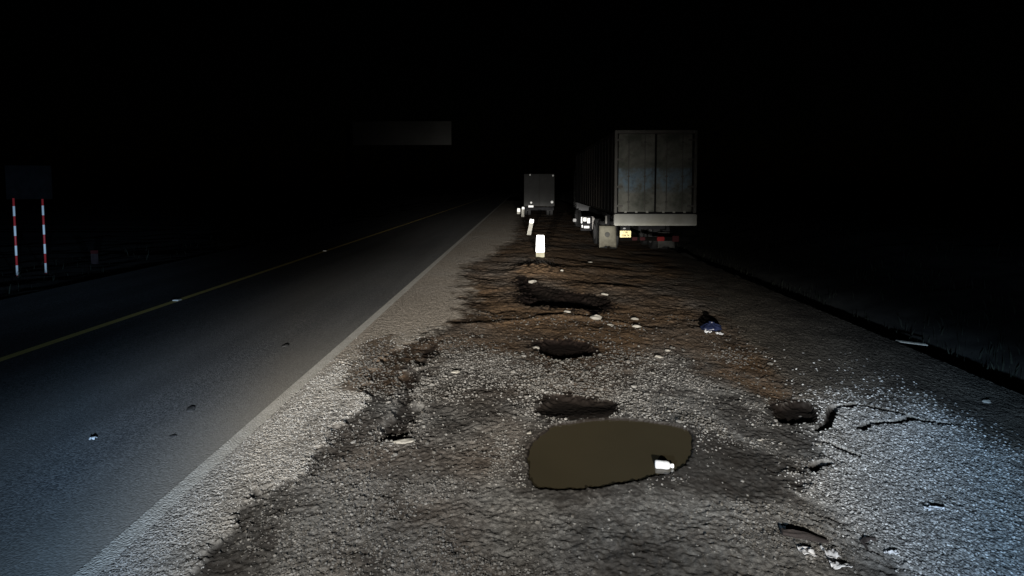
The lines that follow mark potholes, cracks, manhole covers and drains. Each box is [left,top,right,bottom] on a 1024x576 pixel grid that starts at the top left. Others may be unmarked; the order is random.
crack [805,402,955,472]
pothole [512,276,616,313]
pothole [536,393,618,421]
pothole [771,401,819,425]
pothole [524,417,696,491]
pothole [532,338,596,360]
